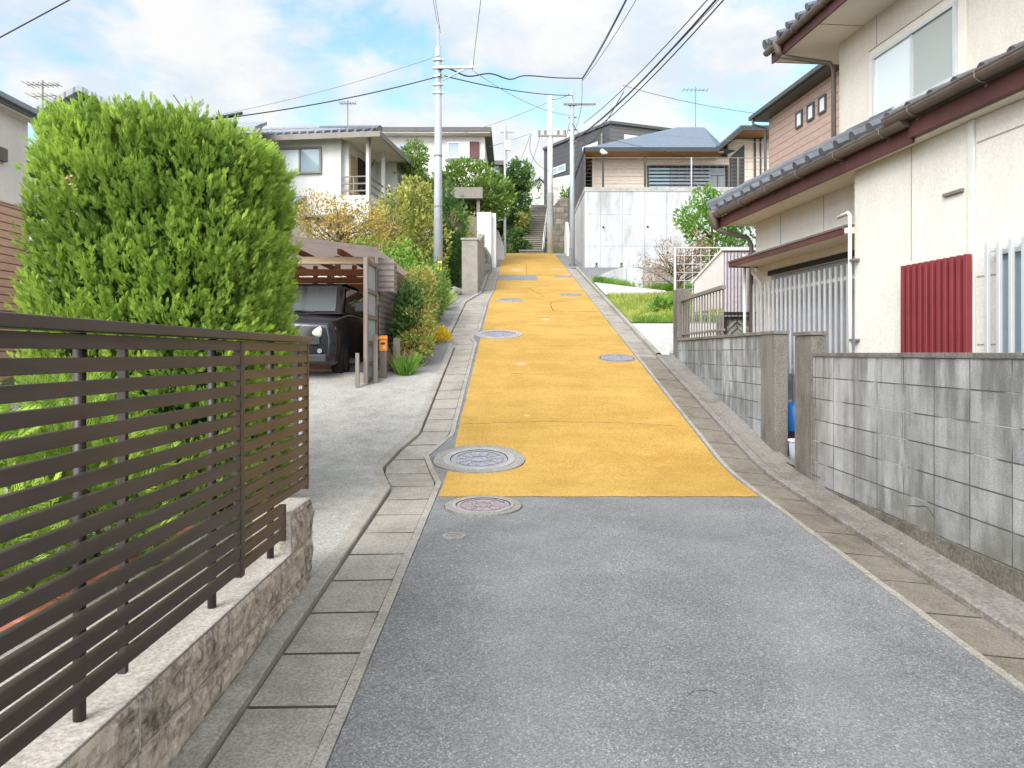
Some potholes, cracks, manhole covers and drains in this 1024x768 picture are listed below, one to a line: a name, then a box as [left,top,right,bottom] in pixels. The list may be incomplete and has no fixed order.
manhole cover [433,445,525,473]
manhole cover [475,330,522,339]
utility cover [442,532,466,540]
manhole cover [598,354,636,362]
manhole cover [444,495,522,517]
